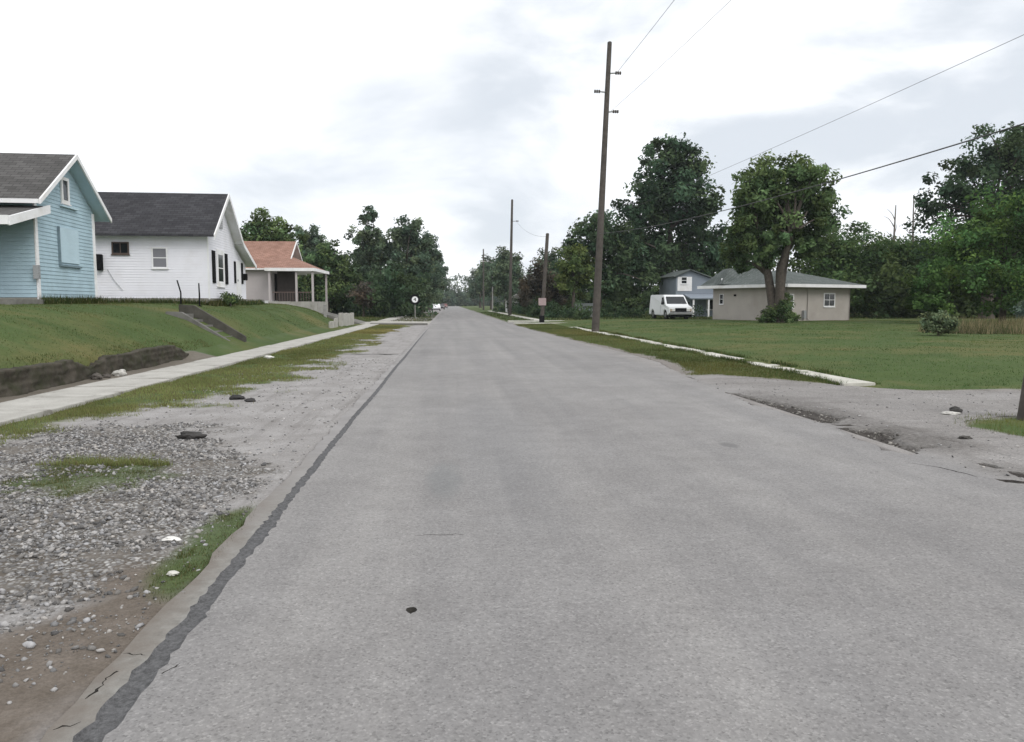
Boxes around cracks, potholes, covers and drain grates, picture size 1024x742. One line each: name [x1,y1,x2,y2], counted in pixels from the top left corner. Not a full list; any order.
pothole [725,392,850,424]
pothole [838,427,942,454]
